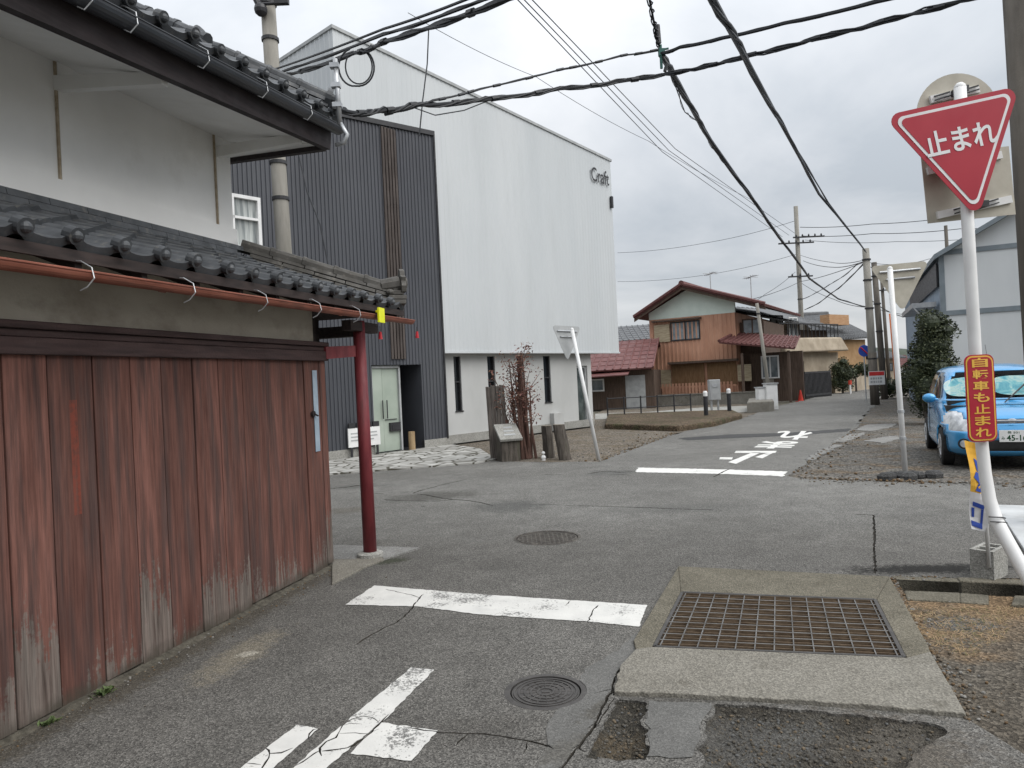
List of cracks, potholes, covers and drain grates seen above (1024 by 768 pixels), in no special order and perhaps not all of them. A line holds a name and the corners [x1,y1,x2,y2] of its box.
crack [357,597,421,644]
crack [417,670,620,768]
manhole cover [504,674,587,710]
manhole cover [513,530,581,545]
drain grate [614,566,966,718]
